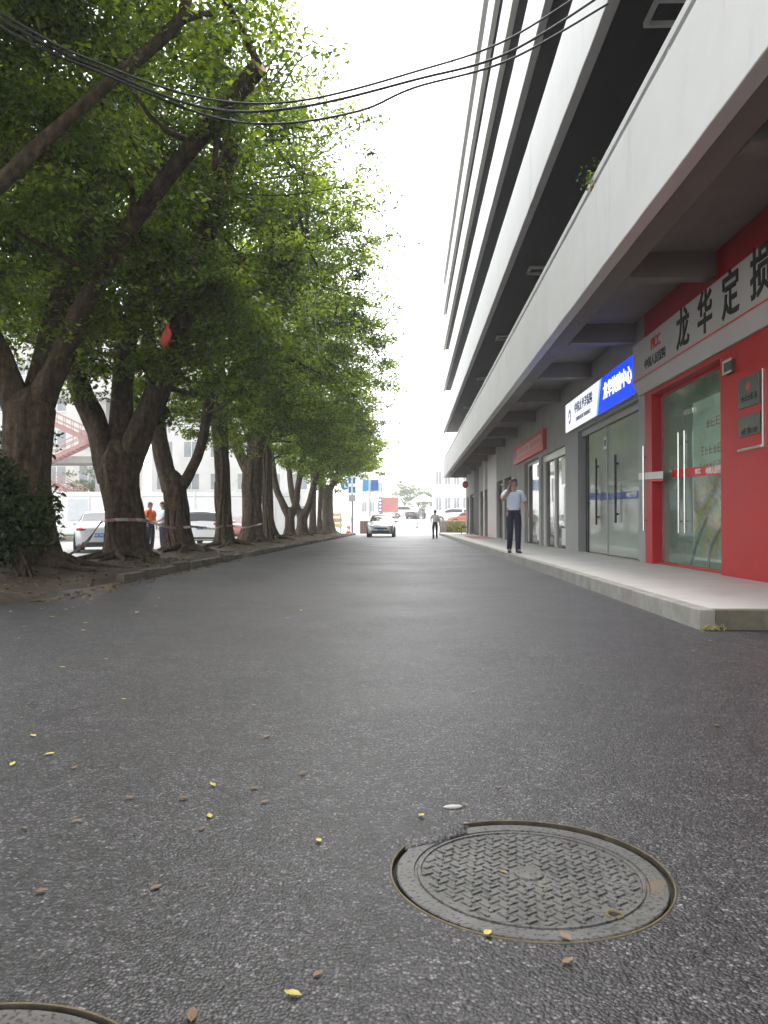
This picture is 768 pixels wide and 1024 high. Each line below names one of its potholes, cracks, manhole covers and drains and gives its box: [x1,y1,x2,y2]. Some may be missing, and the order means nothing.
manhole cover [0,1002,120,1024]
manhole cover [390,820,677,944]
